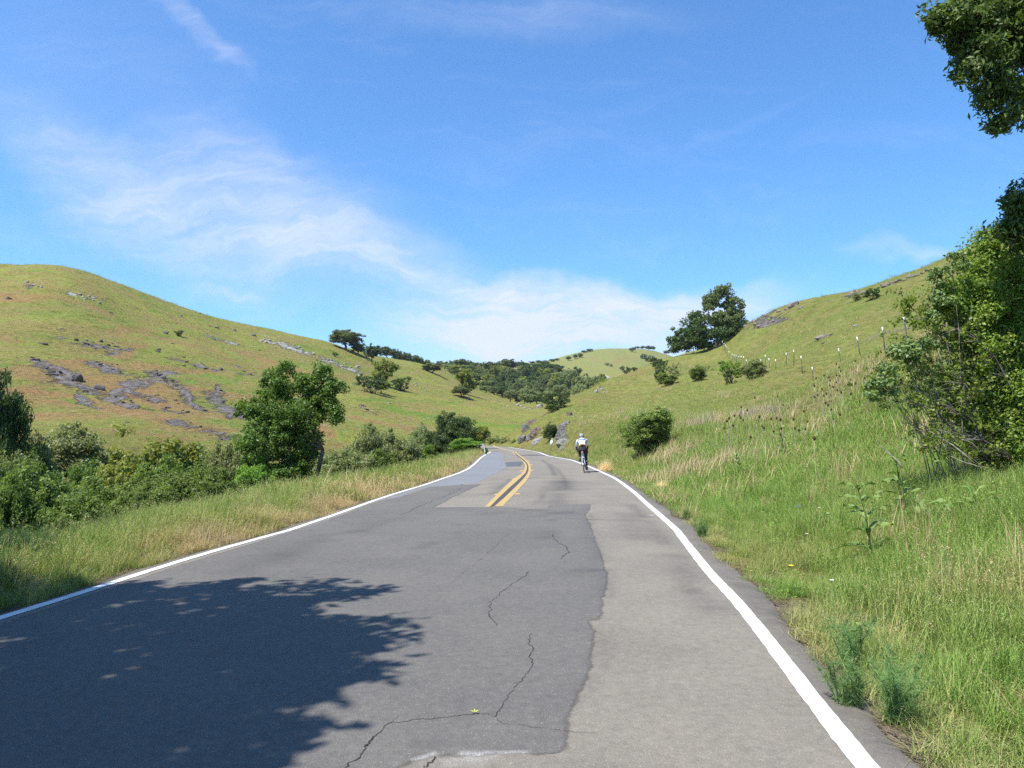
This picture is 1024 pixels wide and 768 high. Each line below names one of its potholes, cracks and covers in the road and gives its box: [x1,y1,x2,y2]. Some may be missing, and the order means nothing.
crack [345,634,595,768]
crack [488,571,529,625]
